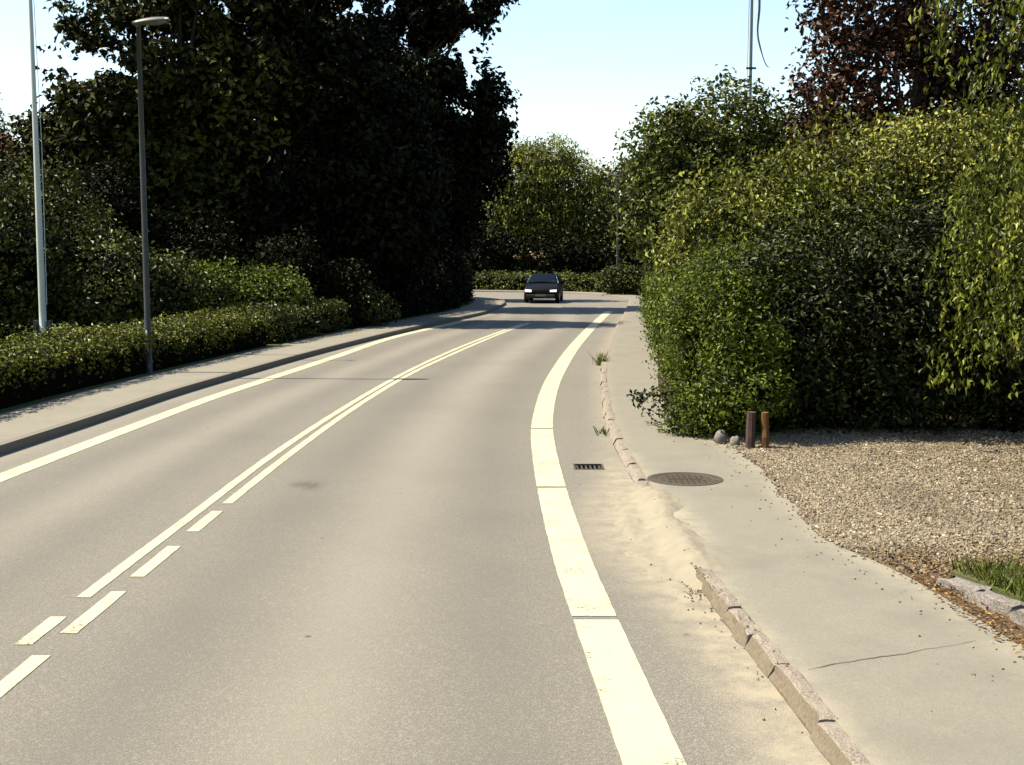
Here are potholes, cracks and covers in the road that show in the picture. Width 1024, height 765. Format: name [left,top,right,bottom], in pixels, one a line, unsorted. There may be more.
crack [813,641,972,669]
manhole cover [647,472,723,486]
